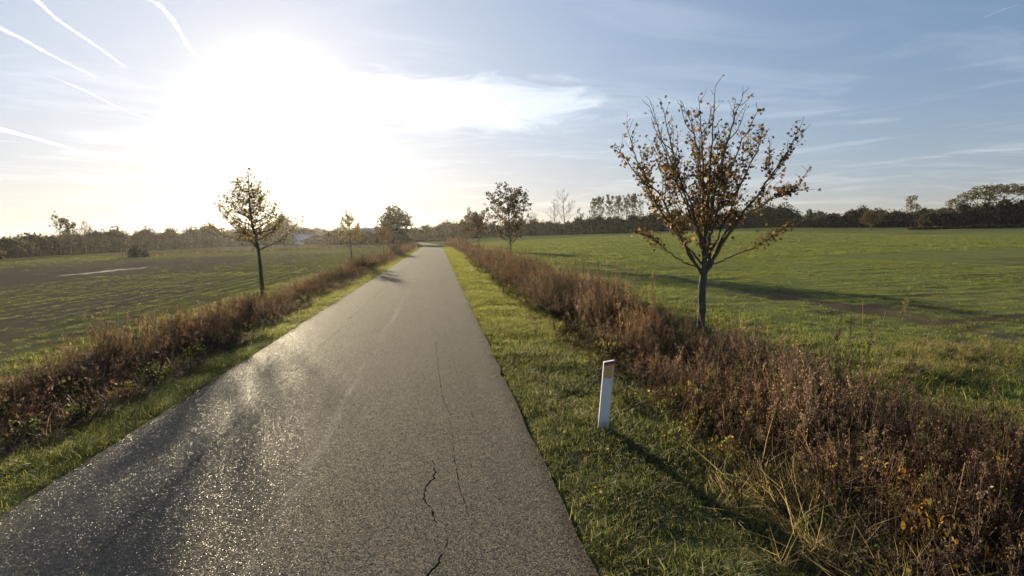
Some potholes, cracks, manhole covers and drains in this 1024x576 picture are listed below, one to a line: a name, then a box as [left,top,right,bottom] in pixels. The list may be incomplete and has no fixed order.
crack [423,461,448,576]
crack [436,351,472,526]
